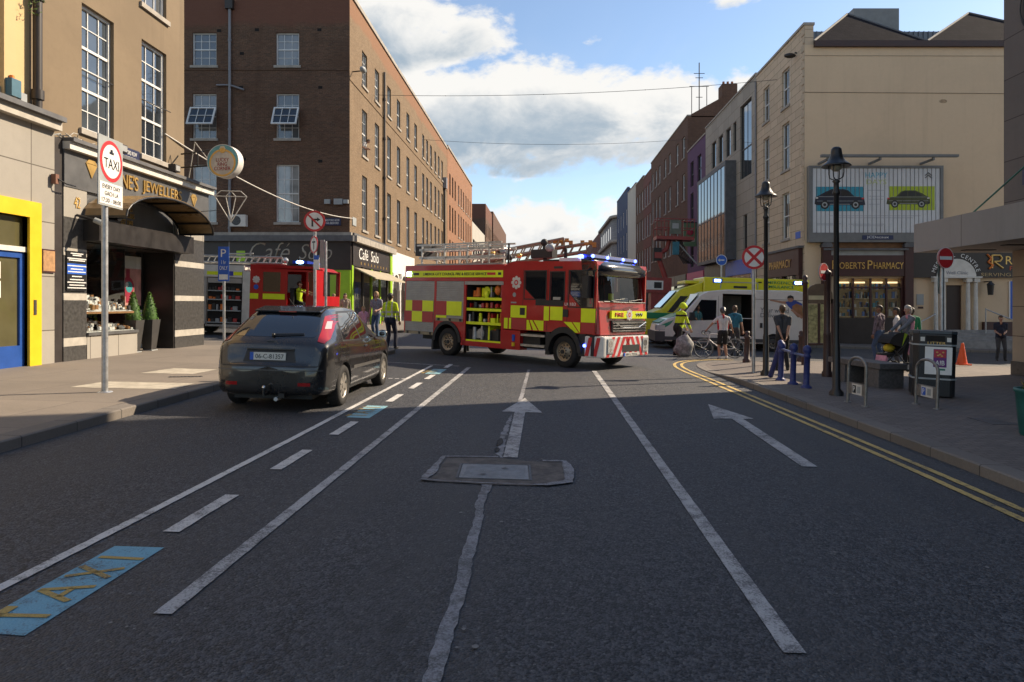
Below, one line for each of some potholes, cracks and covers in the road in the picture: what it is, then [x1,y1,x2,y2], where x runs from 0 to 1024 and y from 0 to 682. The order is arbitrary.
manhole cover [422,457,565,486]
